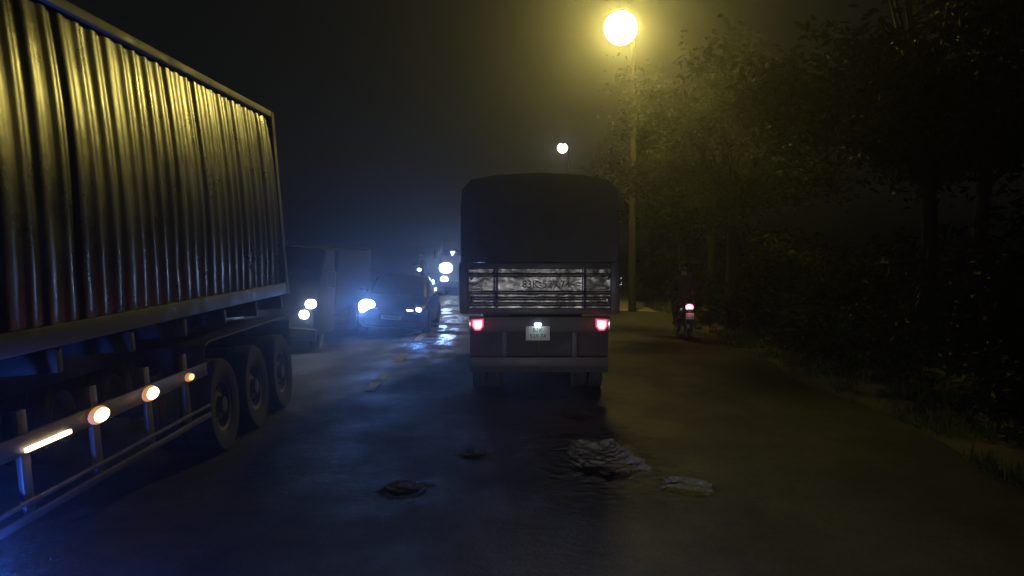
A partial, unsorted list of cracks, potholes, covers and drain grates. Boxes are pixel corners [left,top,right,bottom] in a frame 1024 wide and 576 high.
pothole [559,434,663,488]
pothole [380,480,428,498]
pothole [653,475,718,499]
pothole [458,448,489,460]
pothole [557,408,601,421]
